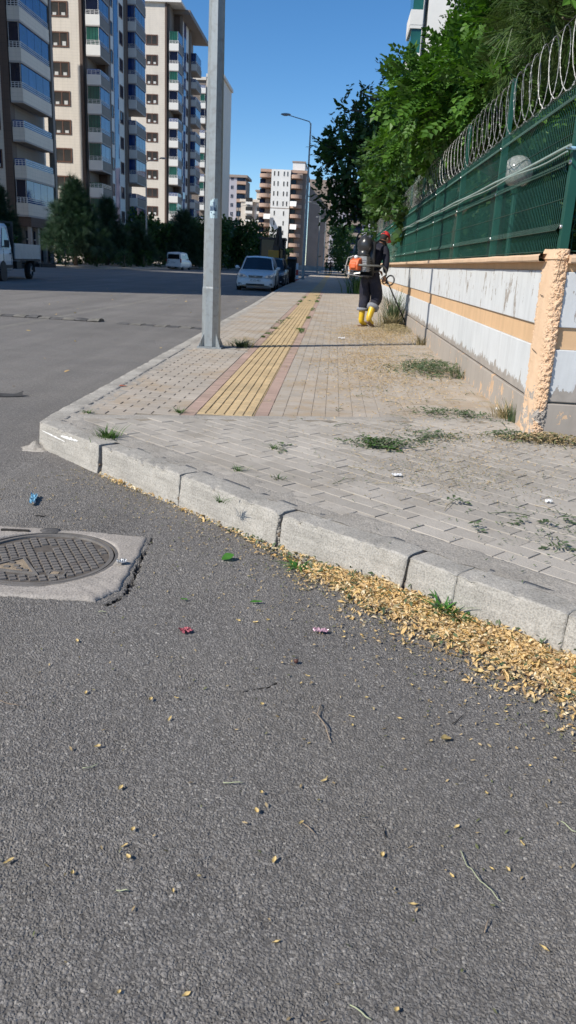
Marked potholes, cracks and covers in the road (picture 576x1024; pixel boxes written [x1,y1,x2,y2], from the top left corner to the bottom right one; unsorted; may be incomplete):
manhole cover [0,526,147,602]
